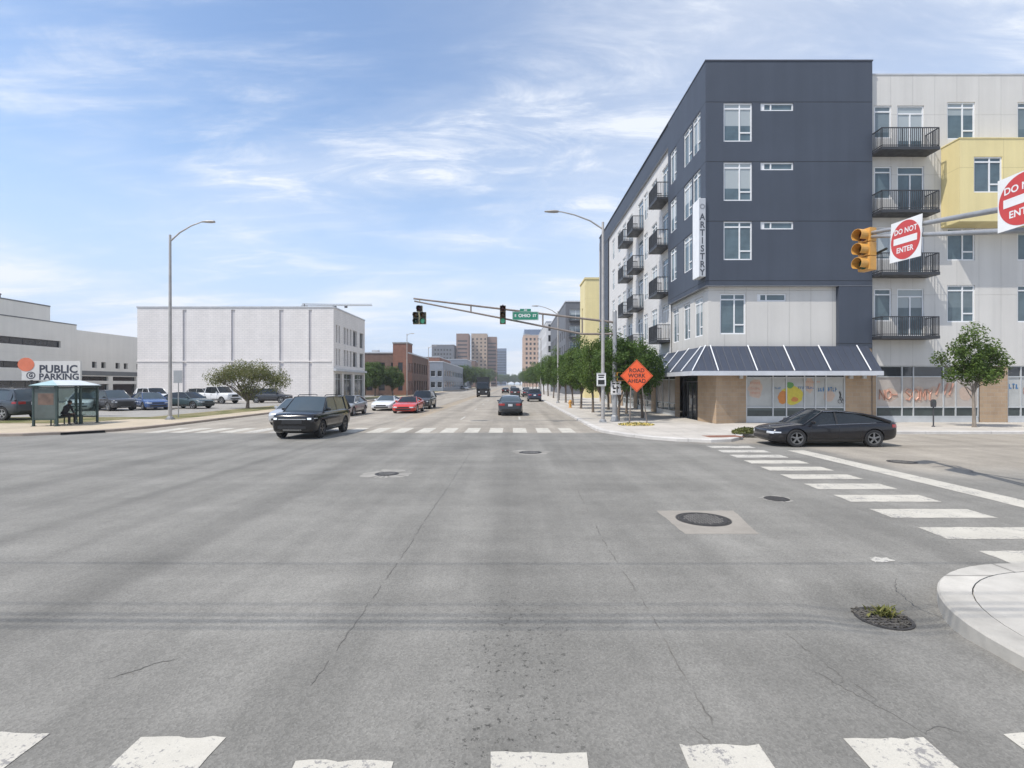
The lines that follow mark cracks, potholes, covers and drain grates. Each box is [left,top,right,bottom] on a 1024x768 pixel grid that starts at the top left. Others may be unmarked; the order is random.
crack [312,456,468,683]
manhole cover [657,510,759,534]
crack [788,635,961,734]
drain grate [850,606,916,631]
manhole cover [360,469,412,478]
